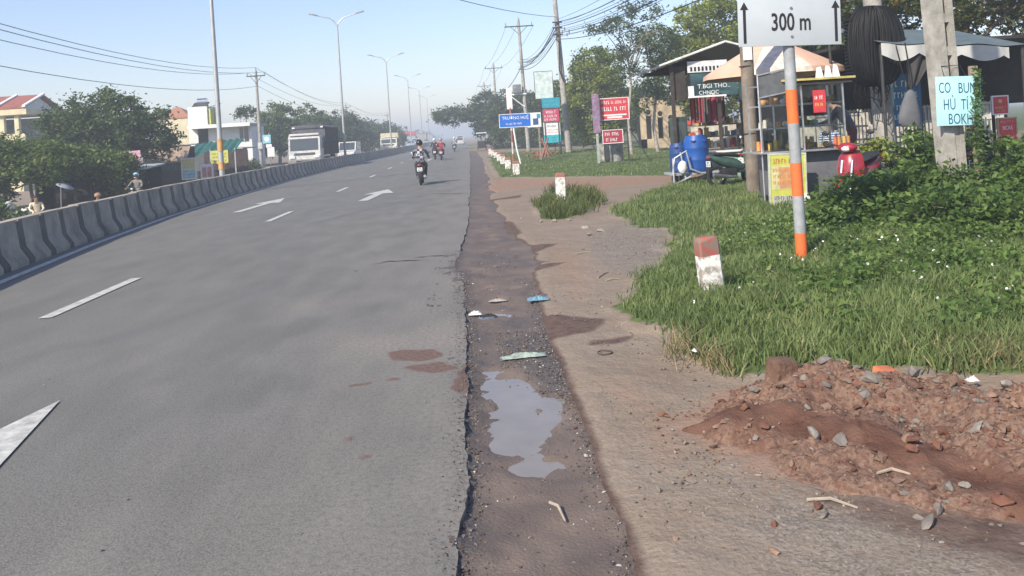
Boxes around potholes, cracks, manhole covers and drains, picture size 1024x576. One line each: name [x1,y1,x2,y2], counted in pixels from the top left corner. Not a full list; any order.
pothole [427,152,637,576]
